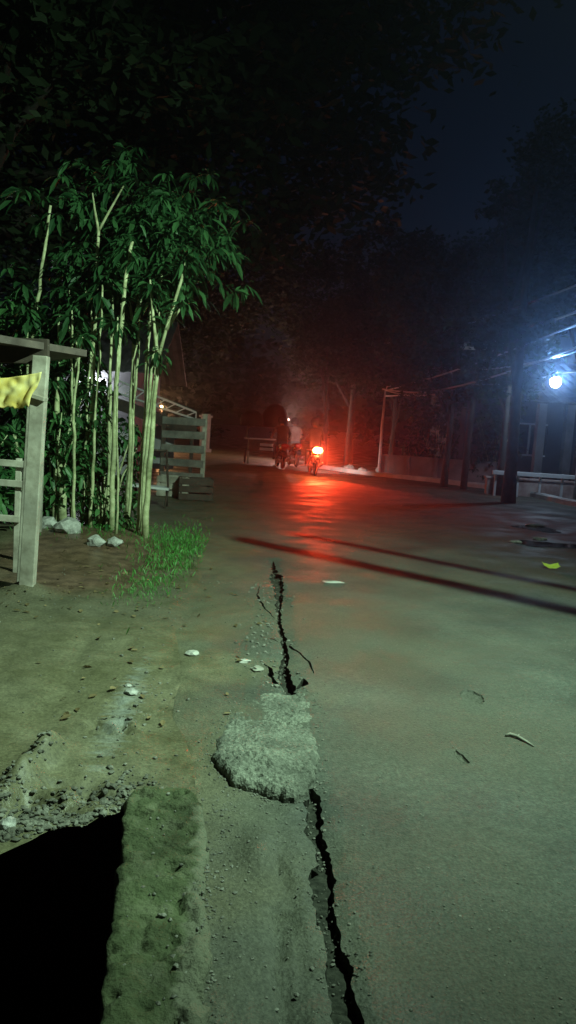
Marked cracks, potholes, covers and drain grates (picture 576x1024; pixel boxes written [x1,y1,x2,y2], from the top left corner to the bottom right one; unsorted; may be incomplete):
crack [256,562,365,1024]
